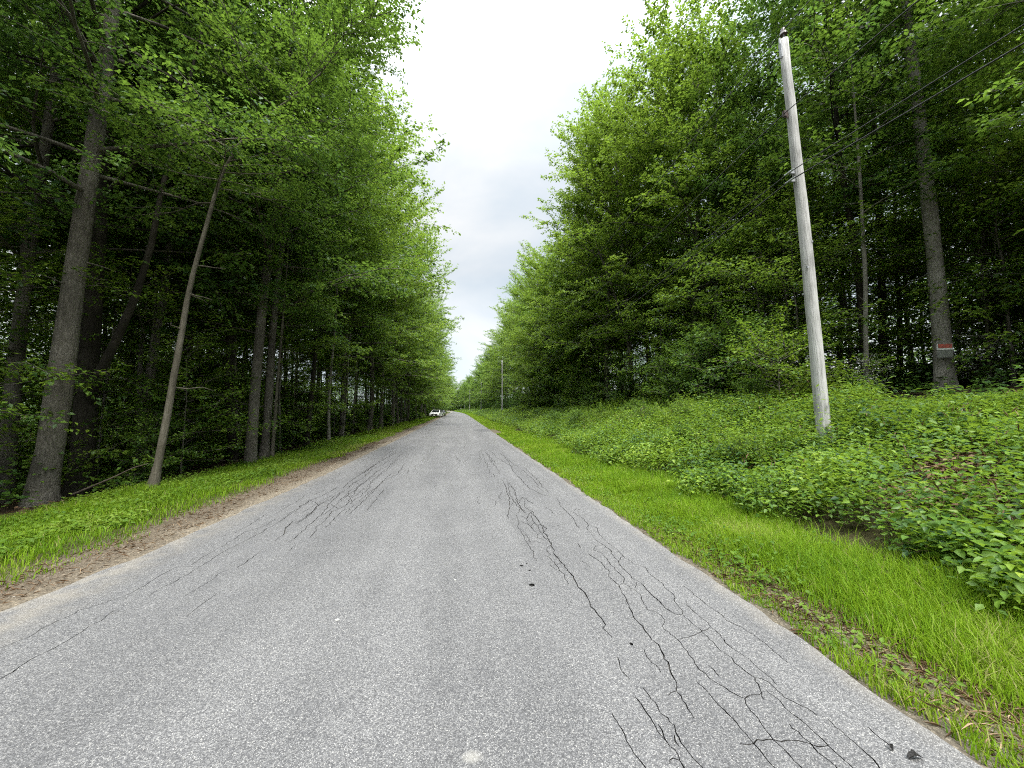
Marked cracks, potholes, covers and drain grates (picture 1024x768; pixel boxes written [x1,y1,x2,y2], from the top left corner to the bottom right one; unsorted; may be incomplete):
crack [479,453,610,635]
crack [0,451,408,679]
crack [558,501,888,768]
